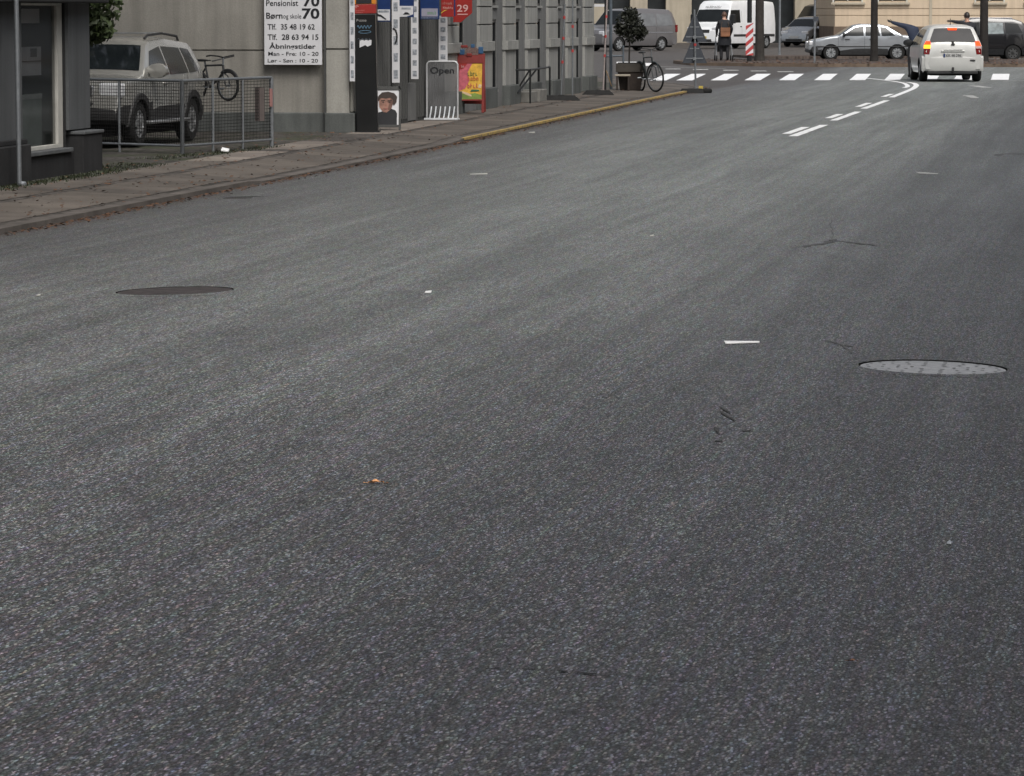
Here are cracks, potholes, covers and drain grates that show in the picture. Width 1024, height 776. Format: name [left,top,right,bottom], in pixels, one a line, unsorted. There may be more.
crack [803,220,906,247]
crack [714,406,751,441]
manhole cover [116,287,234,297]
crack [478,666,681,680]
manhole cover [859,360,1008,379]
